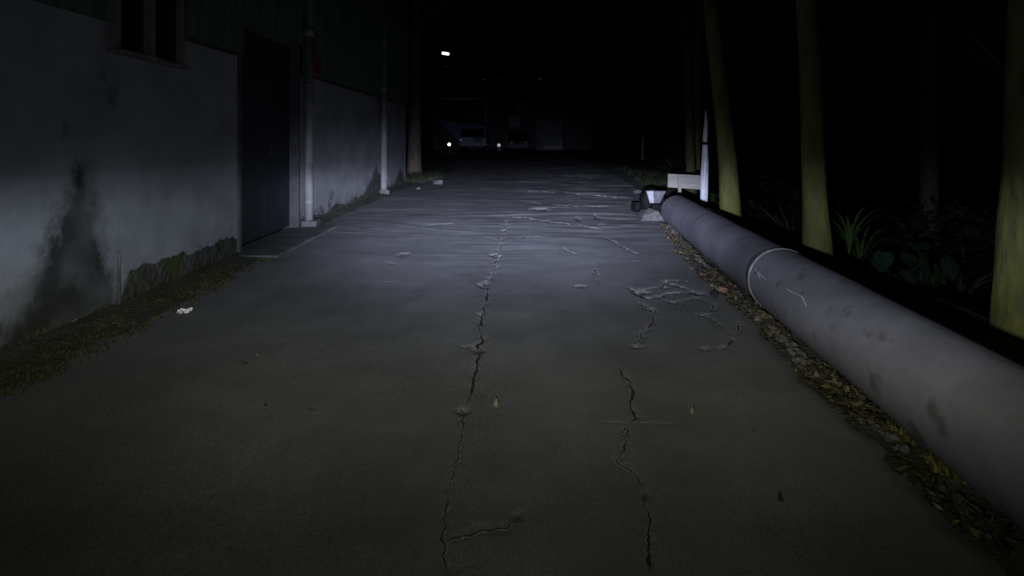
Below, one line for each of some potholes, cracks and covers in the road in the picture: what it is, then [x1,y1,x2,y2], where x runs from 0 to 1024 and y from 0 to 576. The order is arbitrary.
crack [439,174,631,576]
crack [614,368,654,572]
crack [627,281,741,359]
